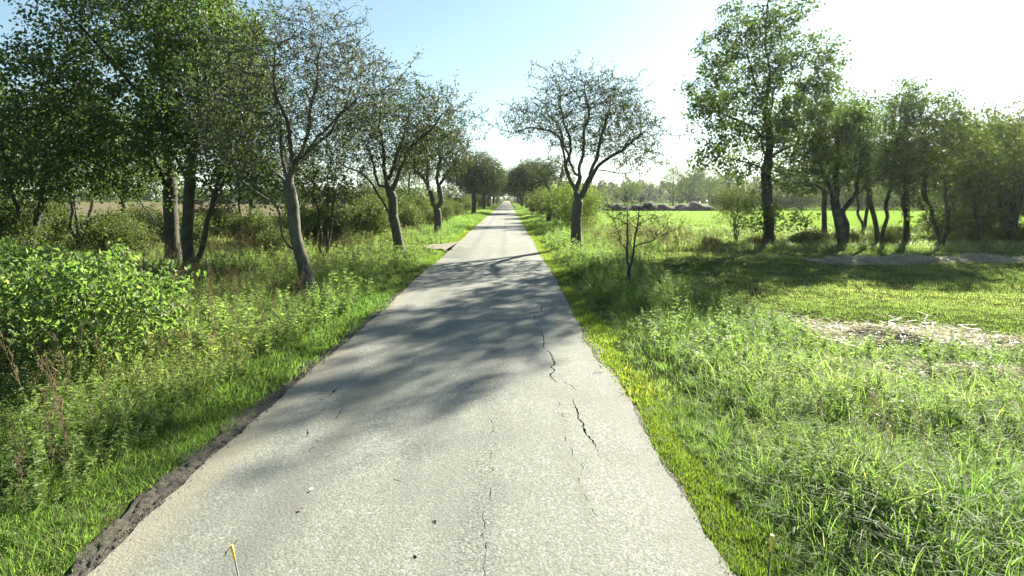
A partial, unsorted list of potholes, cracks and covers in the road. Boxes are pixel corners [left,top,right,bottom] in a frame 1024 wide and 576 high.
crack [533,305,601,515]
